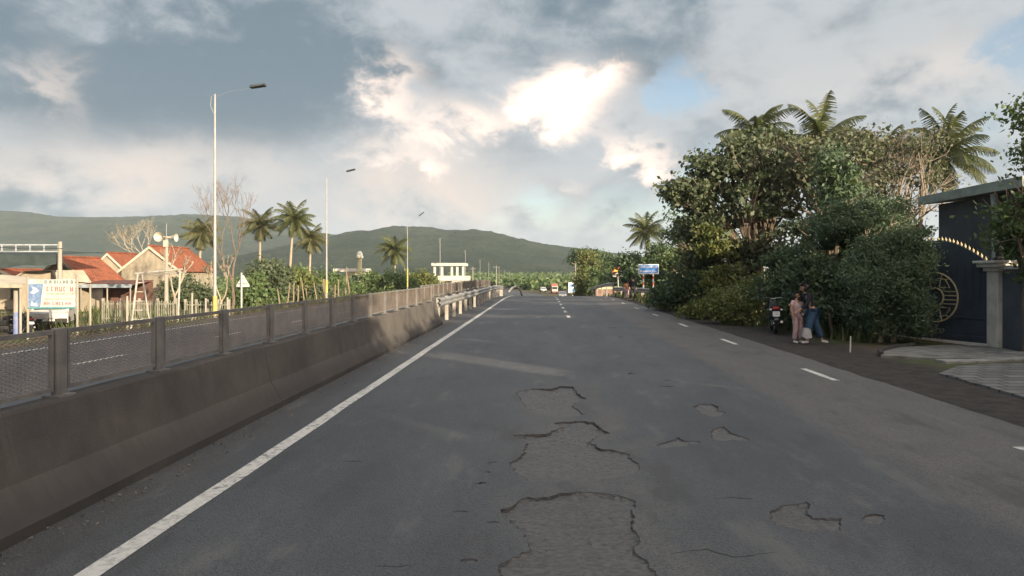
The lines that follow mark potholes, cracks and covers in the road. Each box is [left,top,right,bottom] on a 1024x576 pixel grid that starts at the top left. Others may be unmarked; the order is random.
pothole [710,426,750,441]
pothole [657,437,700,448]
pothole [505,385,591,419]
pothole [862,514,885,524]
pothole [488,421,658,487]
crack [671,549,774,558]
pothole [693,404,726,417]
pothole [748,497,865,539]
pothole [471,488,673,576]
